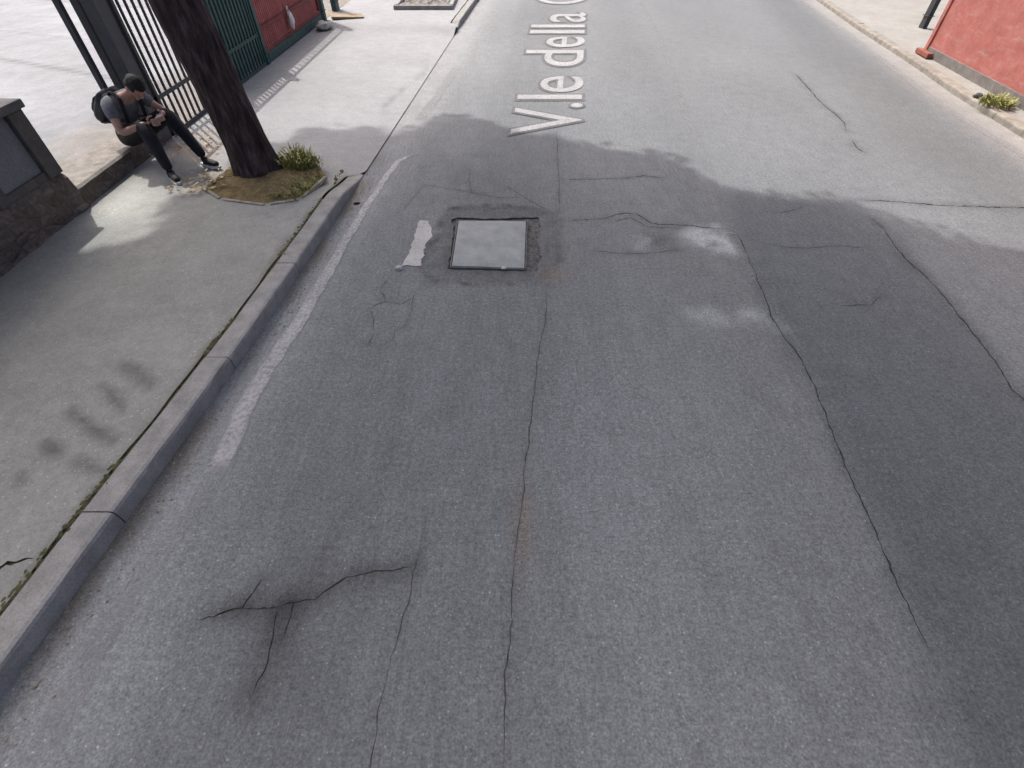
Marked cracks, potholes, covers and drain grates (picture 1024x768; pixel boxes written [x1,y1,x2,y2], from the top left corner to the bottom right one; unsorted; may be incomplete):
crack [878,224,1023,399]
crack [0,558,33,569]
crack [866,200,1024,208]
manhole cover [448,217,542,272]
crack [503,131,659,768]
crack [369,282,414,342]
crack [799,78,863,152]
crack [572,213,717,254]
crack [196,517,427,768]
